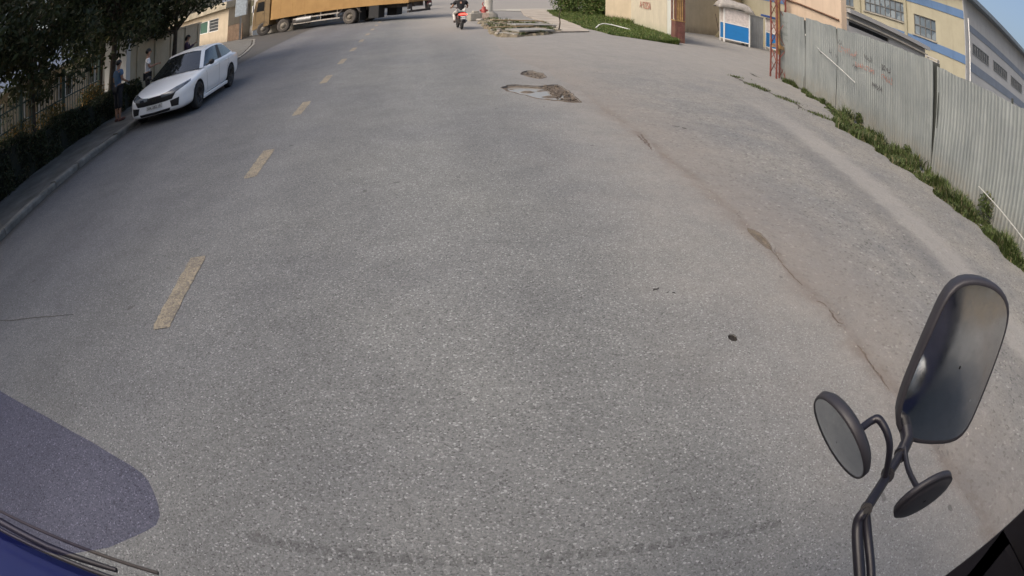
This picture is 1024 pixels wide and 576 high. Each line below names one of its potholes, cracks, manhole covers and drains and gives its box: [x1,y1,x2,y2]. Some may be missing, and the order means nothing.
pothole [520,70,547,79]
pothole [501,84,582,103]
crack [771,250,889,389]
